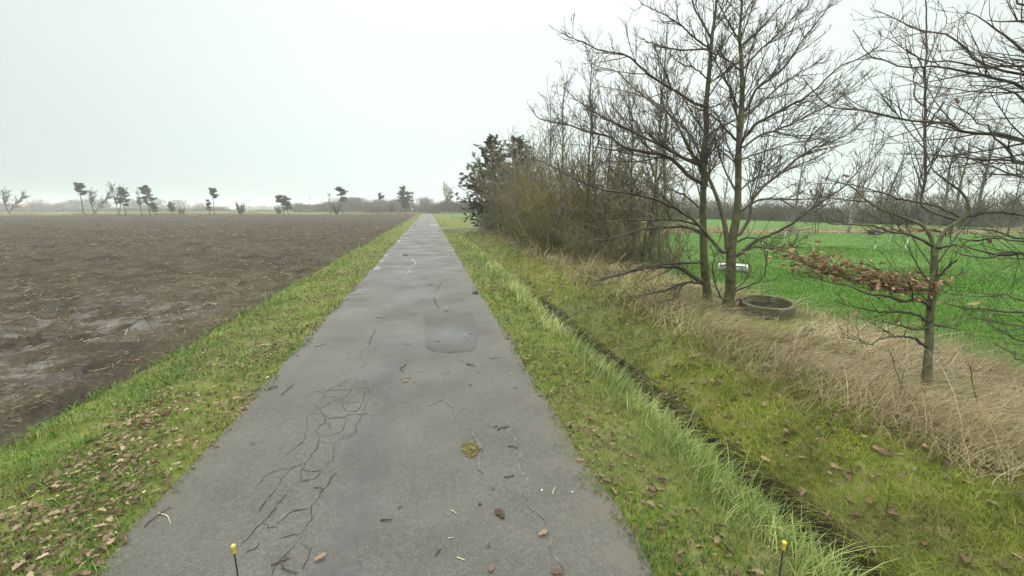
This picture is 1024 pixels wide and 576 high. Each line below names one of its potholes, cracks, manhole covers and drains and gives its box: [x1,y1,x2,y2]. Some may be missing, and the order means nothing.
crack [241,361,382,576]
crack [428,364,484,474]
crack [504,416,566,576]
